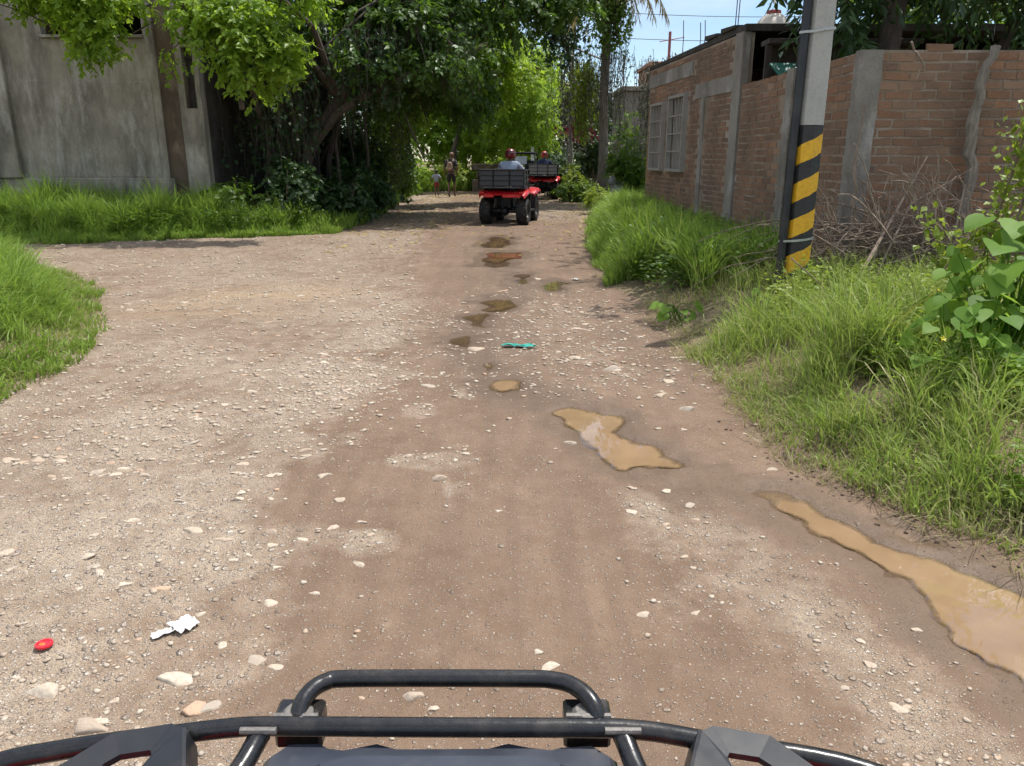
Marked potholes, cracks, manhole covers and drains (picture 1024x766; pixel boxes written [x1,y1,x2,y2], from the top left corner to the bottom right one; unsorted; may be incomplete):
pothole [699,471,1024,740]
pothole [447,311,508,329]
pothole [468,234,524,249]
pothole [464,295,537,313]
pothole [526,399,742,488]
pothole [462,250,541,271]
